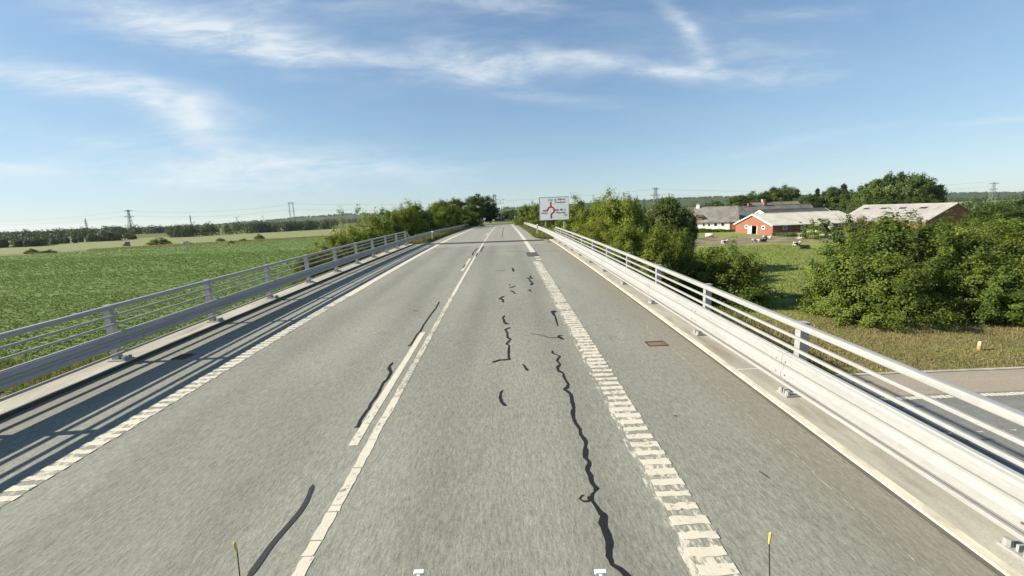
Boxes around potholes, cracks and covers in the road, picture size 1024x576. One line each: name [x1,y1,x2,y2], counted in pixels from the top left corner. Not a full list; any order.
crack [492,268,564,371]
crack [498,390,507,406]
crack [355,302,440,428]
